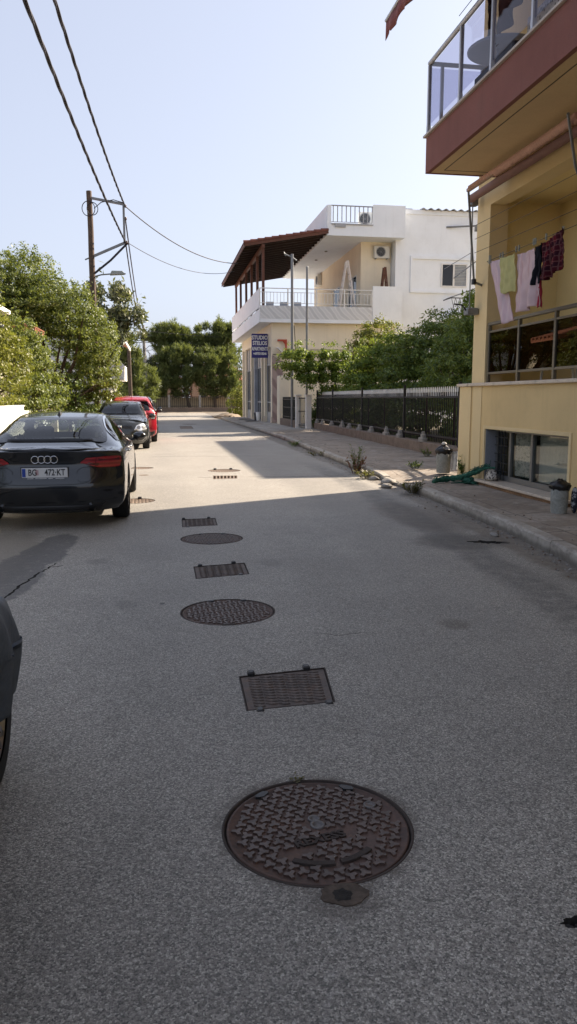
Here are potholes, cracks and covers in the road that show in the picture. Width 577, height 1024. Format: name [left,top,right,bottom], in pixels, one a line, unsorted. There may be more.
crack [4,563,59,598]
manhole cover [221,779,414,907]
manhole cover [180,533,243,545]
manhole cover [180,599,275,626]
